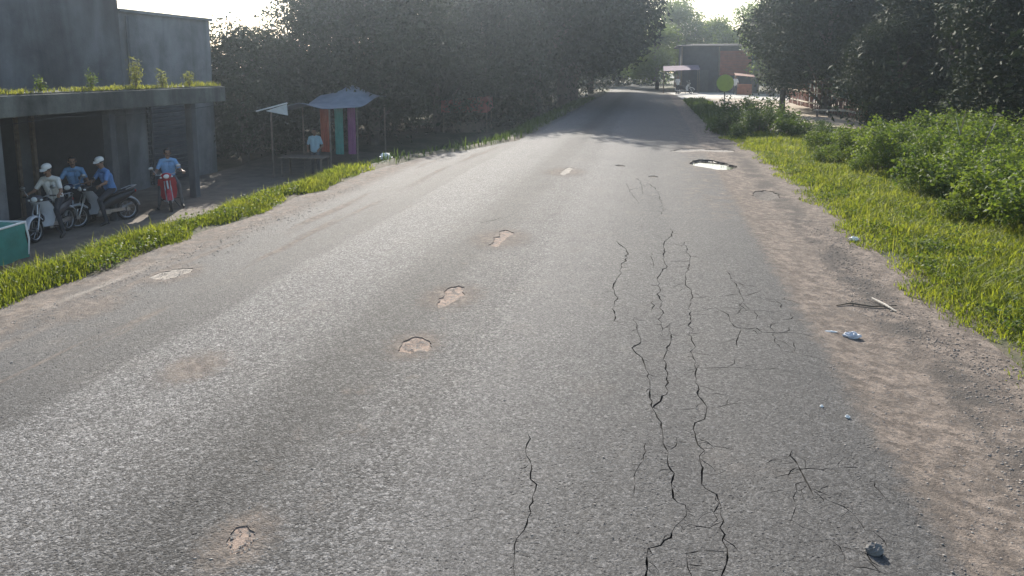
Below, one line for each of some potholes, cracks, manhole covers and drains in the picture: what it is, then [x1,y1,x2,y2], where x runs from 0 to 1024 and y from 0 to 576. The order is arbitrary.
crack [606,243,629,322]
crack [629,231,820,576]
pothole [437,286,465,309]
crack [767,451,910,574]
crack [509,433,537,576]
pothole [226,526,256,554]
pothole [489,230,514,247]
